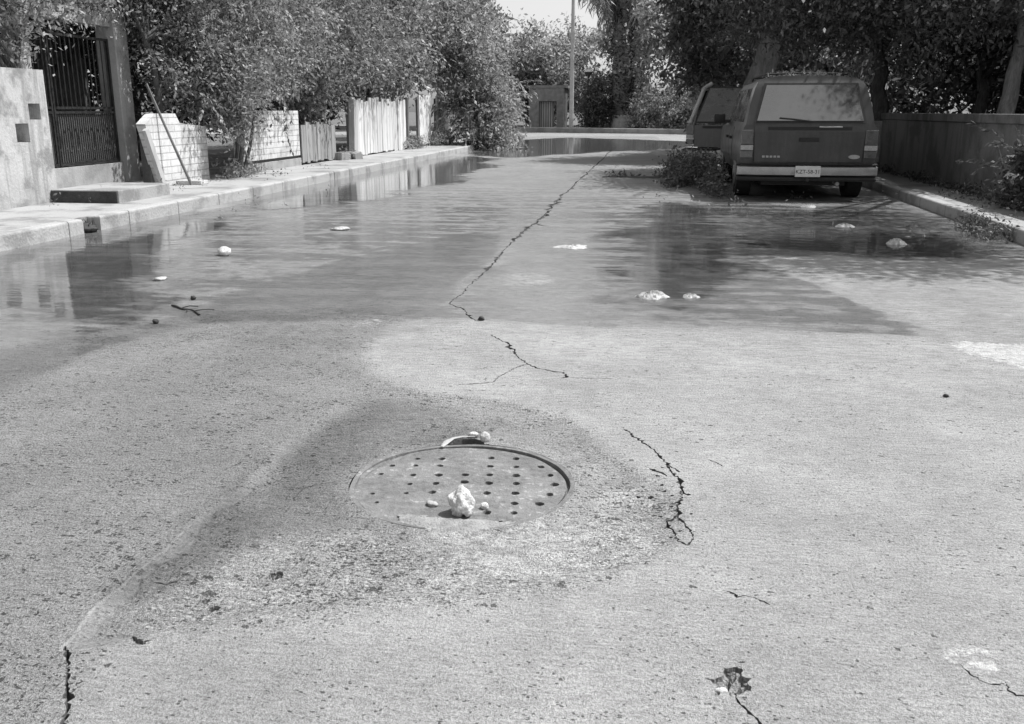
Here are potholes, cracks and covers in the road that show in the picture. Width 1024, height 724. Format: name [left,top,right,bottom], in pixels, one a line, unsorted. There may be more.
crack [960,664,1024,697]
pothole [707,667,751,699]
manhole cover [349,436,575,533]
crack [60,646,75,724]
crack [459,335,609,385]
crack [624,429,722,545]
